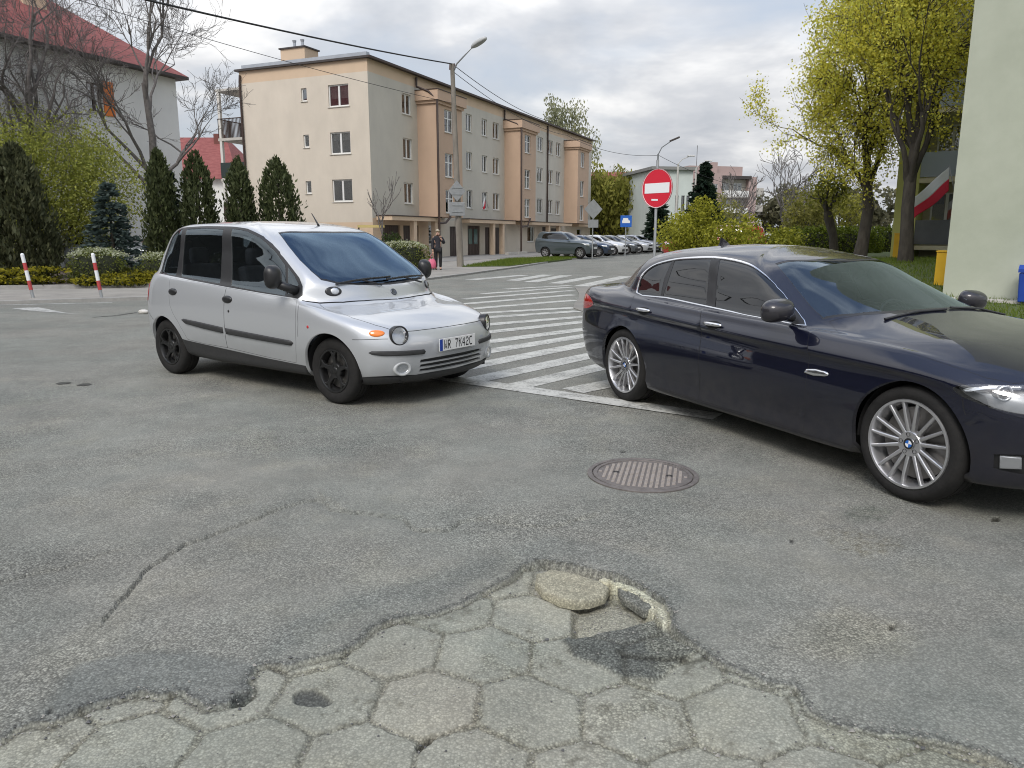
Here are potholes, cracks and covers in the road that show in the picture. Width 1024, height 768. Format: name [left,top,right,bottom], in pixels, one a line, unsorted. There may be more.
crack [0,492,595,623]
pothole [0,559,1020,768]
manhole cover [587,458,699,493]
crack [70,641,166,665]
